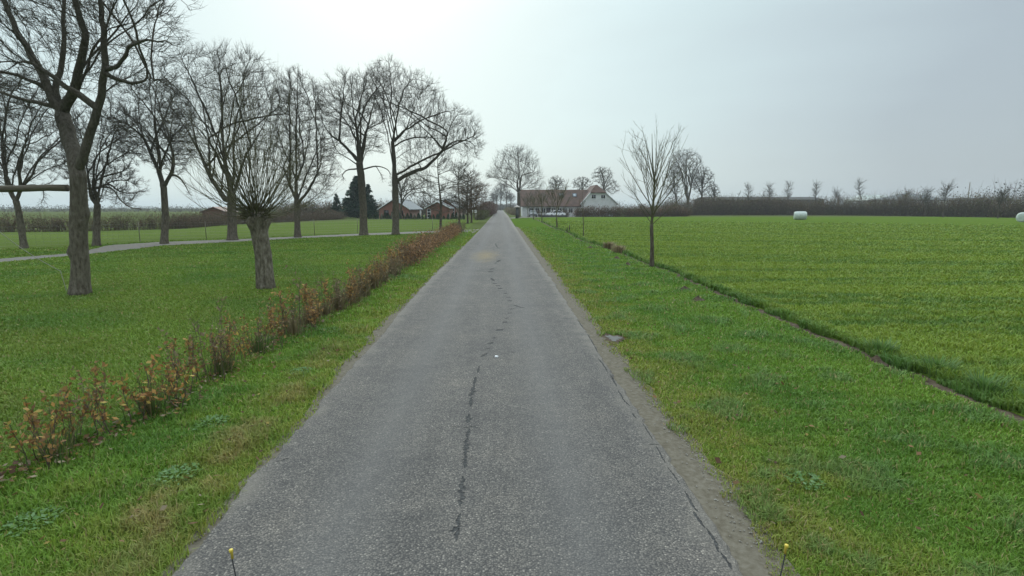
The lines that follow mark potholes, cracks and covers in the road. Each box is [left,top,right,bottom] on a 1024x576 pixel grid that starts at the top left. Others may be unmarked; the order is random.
crack [449,243,523,540]
crack [580,323,732,569]
